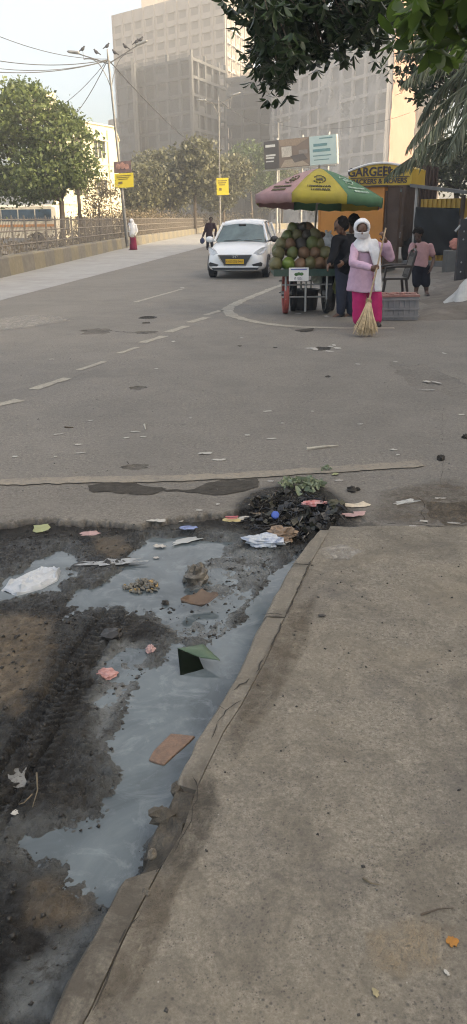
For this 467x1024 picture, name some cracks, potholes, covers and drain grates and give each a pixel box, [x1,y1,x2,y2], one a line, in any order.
pothole [0,517,329,1024]
crack [92,869,158,1011]
crack [177,776,198,847]
